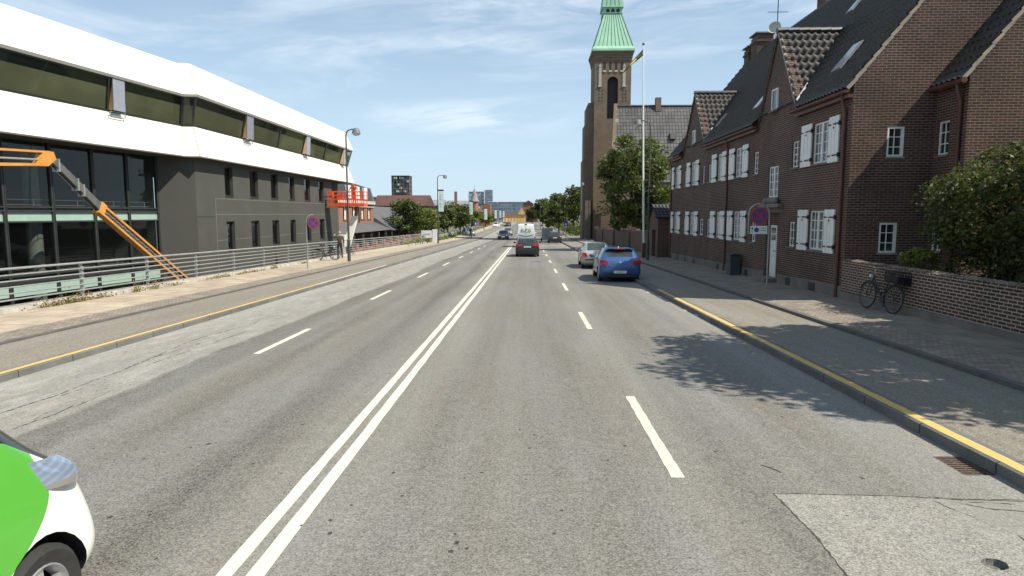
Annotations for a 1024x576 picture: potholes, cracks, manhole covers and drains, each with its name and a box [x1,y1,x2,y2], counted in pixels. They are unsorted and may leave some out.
drain grate [932,456,995,475]
crack [927,495,1024,539]
